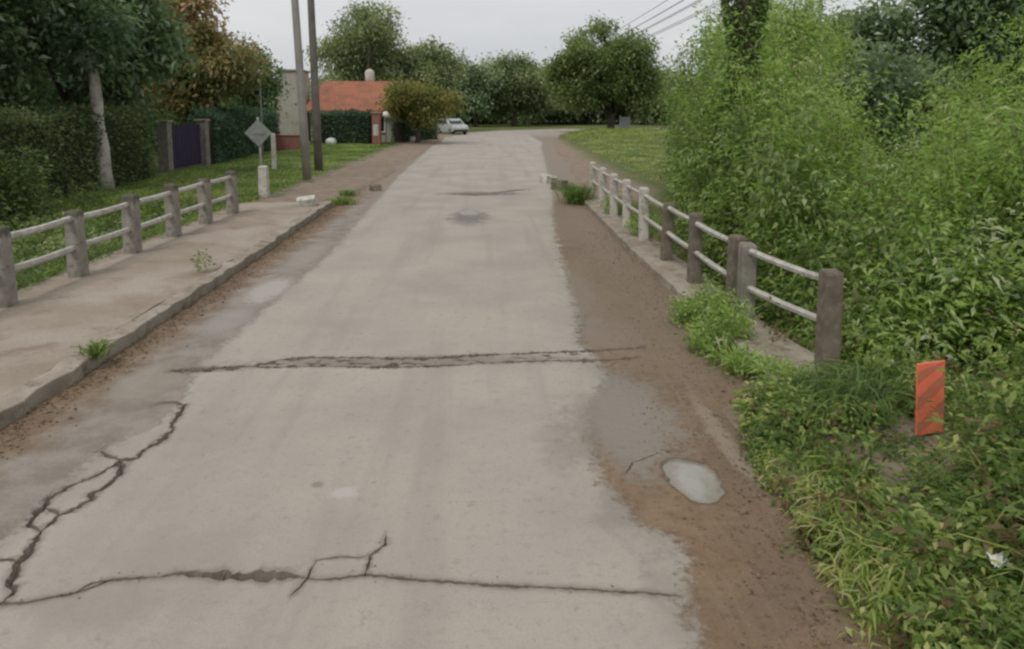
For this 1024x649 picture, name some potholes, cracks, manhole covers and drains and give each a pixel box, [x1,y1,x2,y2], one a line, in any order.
crack [0,402,677,606]
pothole [662,459,725,503]
